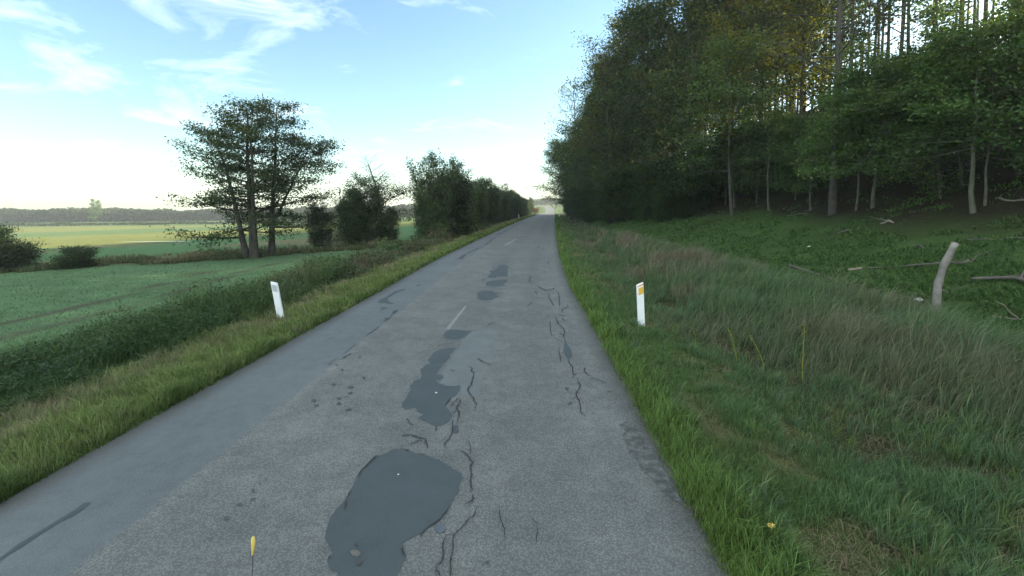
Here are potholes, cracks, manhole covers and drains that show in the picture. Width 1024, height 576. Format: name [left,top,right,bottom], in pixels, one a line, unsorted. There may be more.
crack [527,276,612,416]
crack [401,358,490,576]
